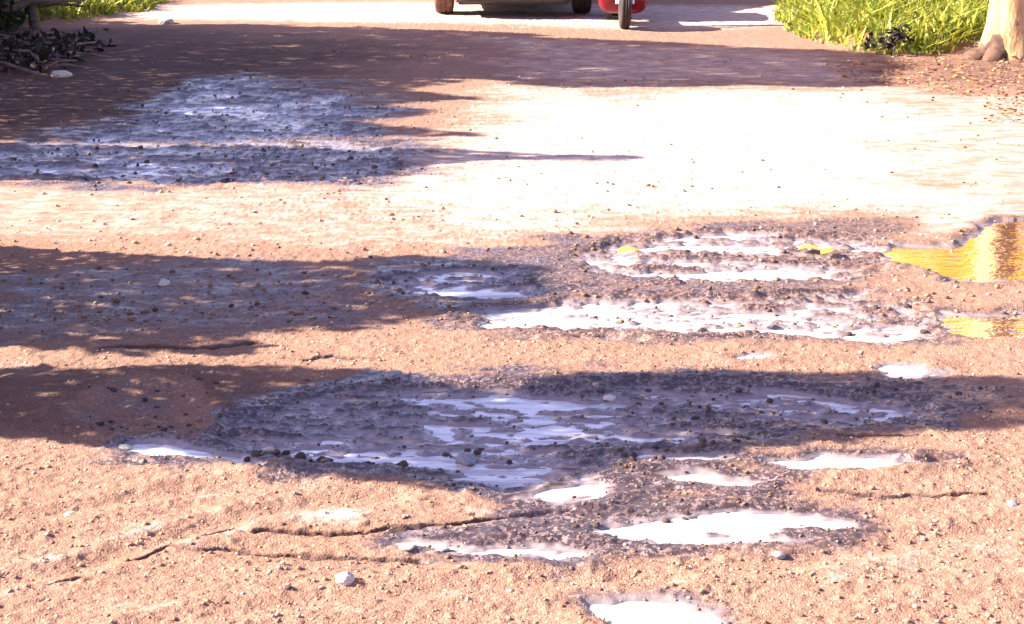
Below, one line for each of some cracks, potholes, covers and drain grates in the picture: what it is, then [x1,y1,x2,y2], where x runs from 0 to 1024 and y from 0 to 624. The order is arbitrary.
pothole [563,224,907,283]
pothole [367,264,547,300]
pothole [576,508,855,545]
pothole [868,360,947,380]
crack [137,505,575,565]
pothole [199,371,944,493]
pothole [581,589,727,624]
pothole [877,214,1024,282]
pothole [117,432,271,466]
pothole [0,76,443,186]
pothole [521,464,617,502]
